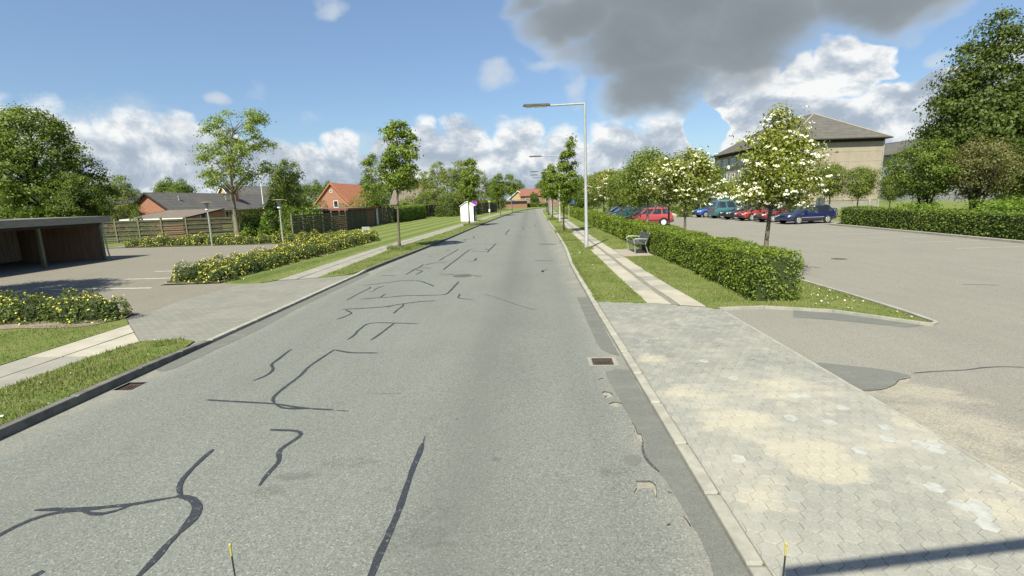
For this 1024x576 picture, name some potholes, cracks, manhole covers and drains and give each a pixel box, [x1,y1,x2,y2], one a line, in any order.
drain grate [114,382,147,390]
pothole [634,480,657,498]
